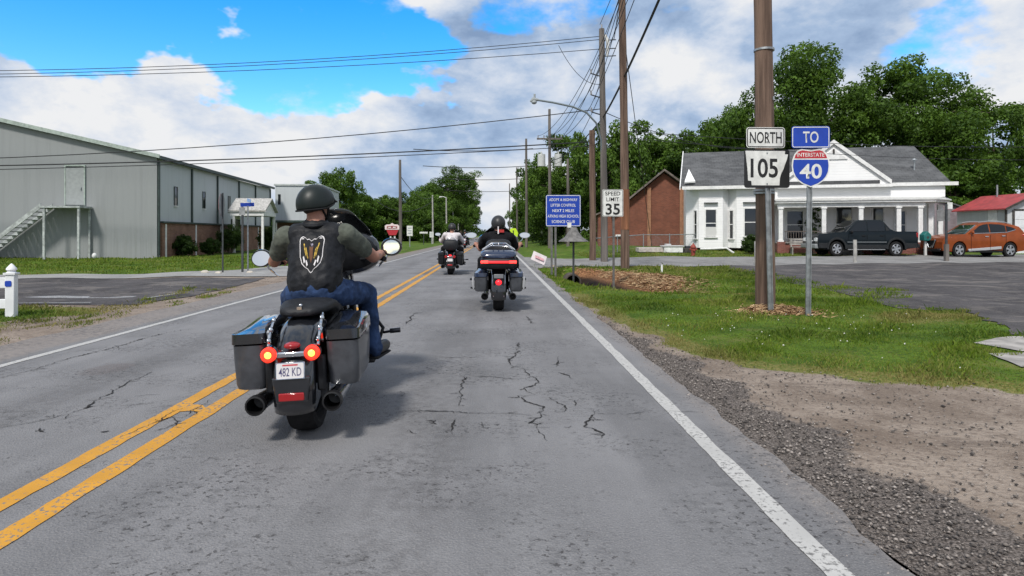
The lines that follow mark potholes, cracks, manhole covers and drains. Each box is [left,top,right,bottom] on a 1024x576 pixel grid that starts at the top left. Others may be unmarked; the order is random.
crack [399,343,695,438]
crack [5,373,208,437]
